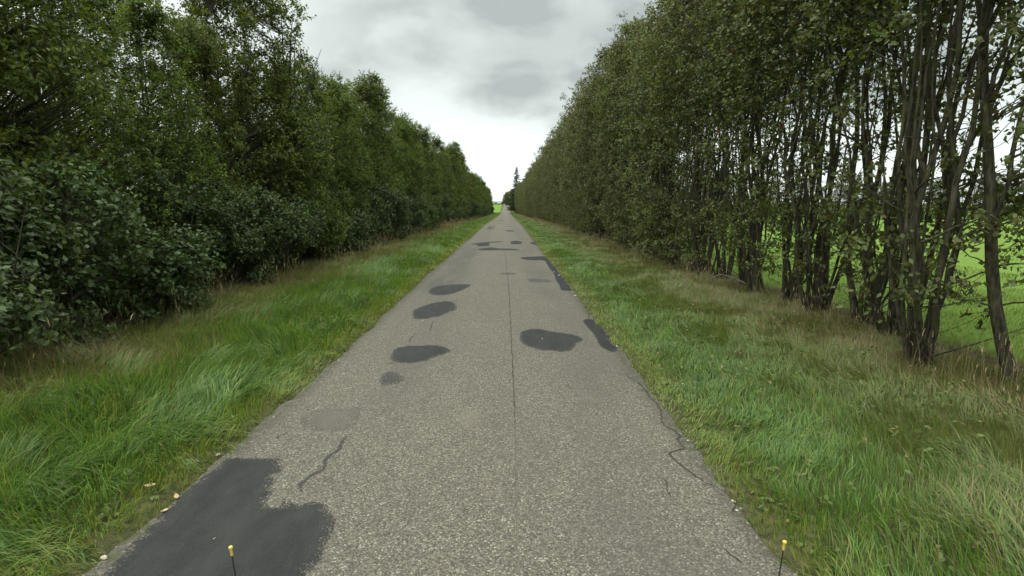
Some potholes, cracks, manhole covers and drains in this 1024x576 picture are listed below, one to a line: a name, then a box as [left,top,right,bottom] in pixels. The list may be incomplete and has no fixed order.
crack [617,371,736,513]
